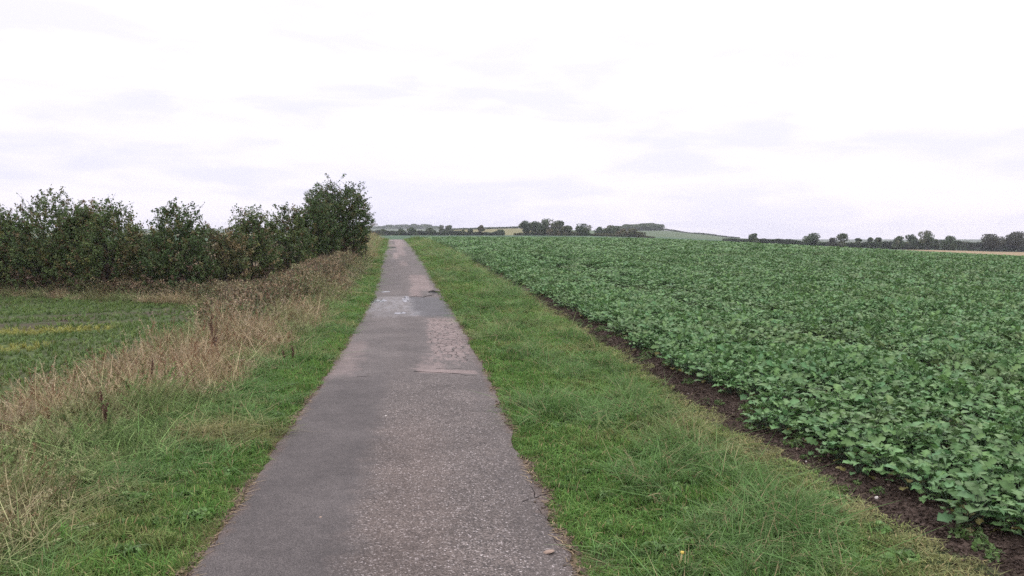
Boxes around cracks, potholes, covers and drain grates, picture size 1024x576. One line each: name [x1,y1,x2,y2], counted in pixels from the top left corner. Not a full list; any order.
crack [414,319,476,376]
